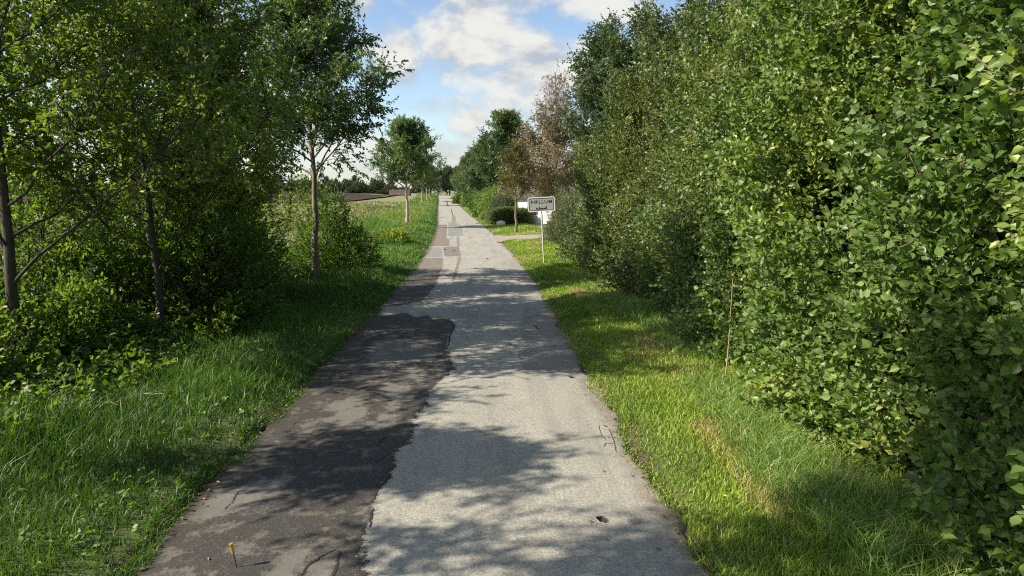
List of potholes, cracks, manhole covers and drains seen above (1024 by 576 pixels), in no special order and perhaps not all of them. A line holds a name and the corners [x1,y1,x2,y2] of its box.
crack [299,549,341,576]
